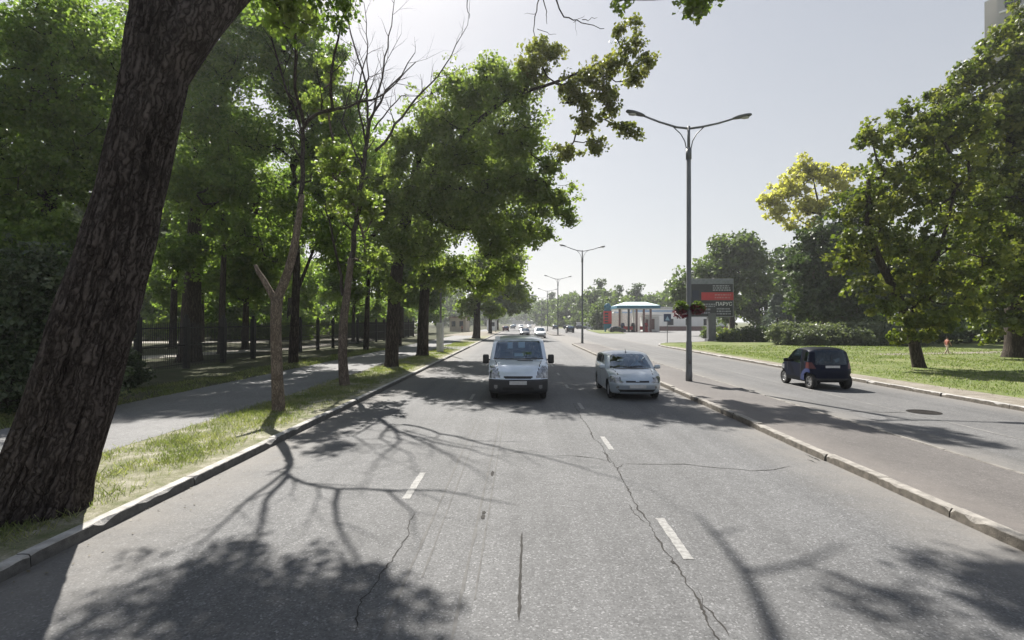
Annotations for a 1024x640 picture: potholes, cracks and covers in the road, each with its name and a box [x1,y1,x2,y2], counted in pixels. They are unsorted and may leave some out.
crack [355,515,414,631]
crack [564,405,729,640]
